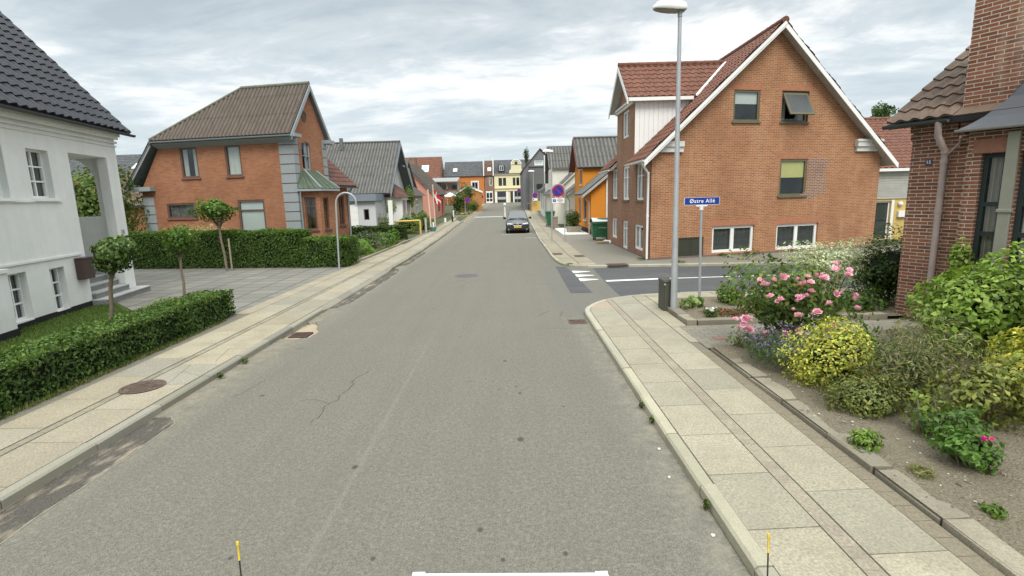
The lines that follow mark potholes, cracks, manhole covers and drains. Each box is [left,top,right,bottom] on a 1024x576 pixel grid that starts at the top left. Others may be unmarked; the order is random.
manhole cover [118,379,166,394]
